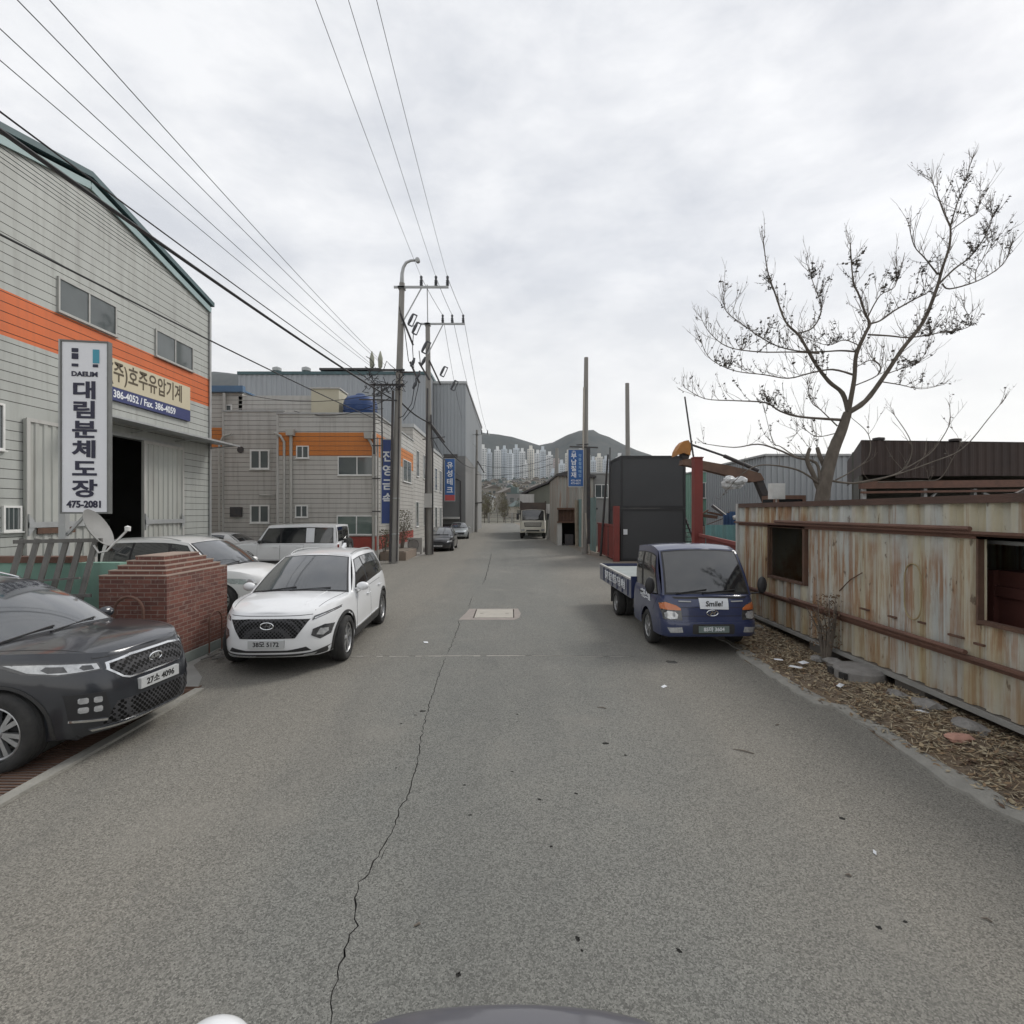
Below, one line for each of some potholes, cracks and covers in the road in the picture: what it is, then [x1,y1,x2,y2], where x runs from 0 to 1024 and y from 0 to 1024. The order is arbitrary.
manhole cover [459,608,521,620]
crack [330,601,471,1024]
